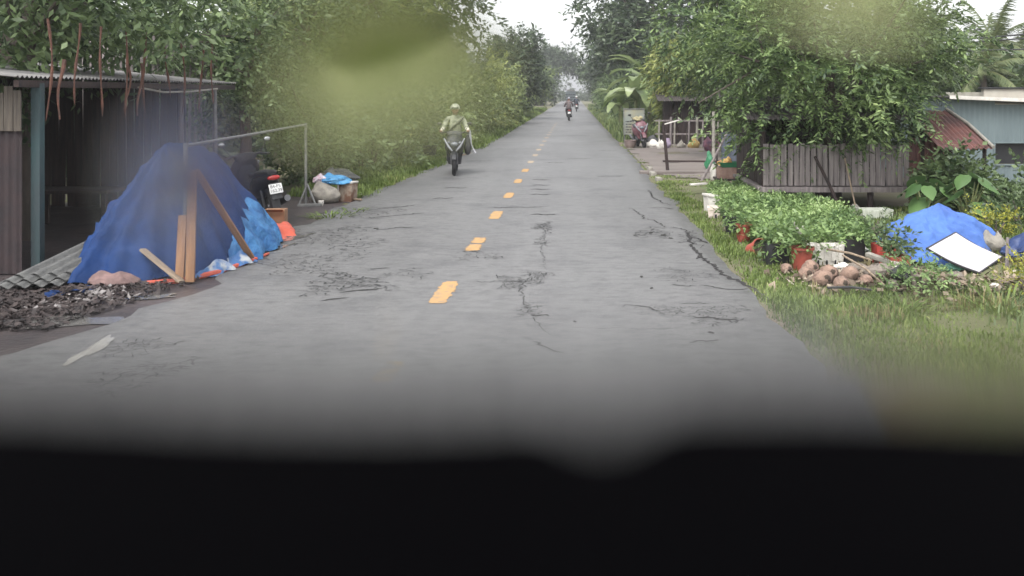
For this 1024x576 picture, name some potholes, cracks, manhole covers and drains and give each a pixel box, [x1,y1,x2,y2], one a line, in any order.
crack [568,191,768,329]
crack [453,251,555,318]
crack [248,187,466,301]
